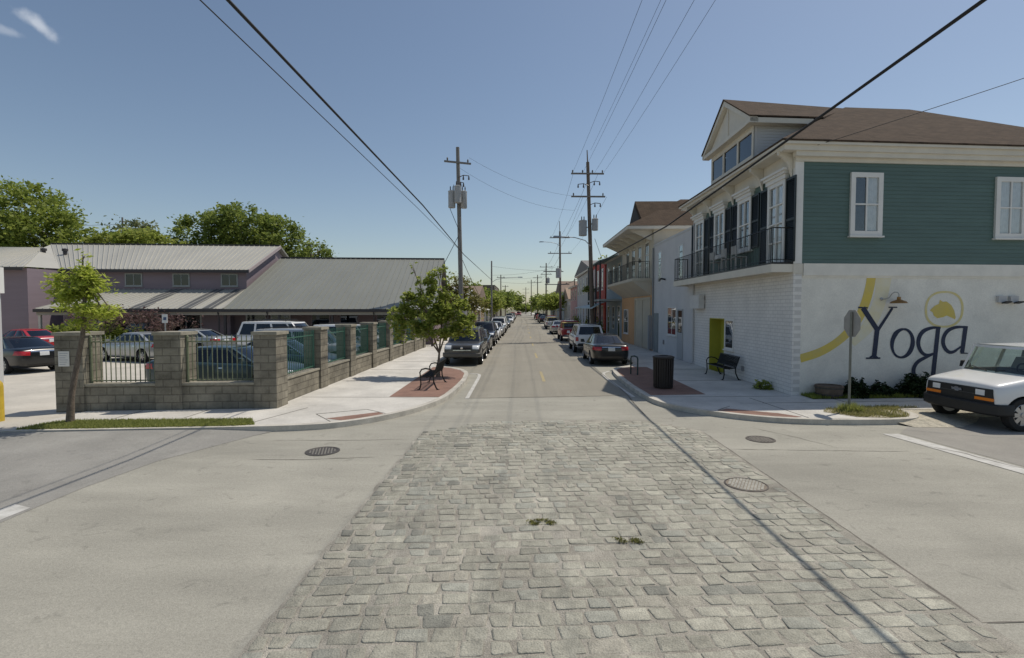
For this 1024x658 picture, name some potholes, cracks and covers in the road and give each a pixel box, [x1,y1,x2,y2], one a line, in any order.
manhole cover [724,477,769,492]
manhole cover [305,446,340,456]
